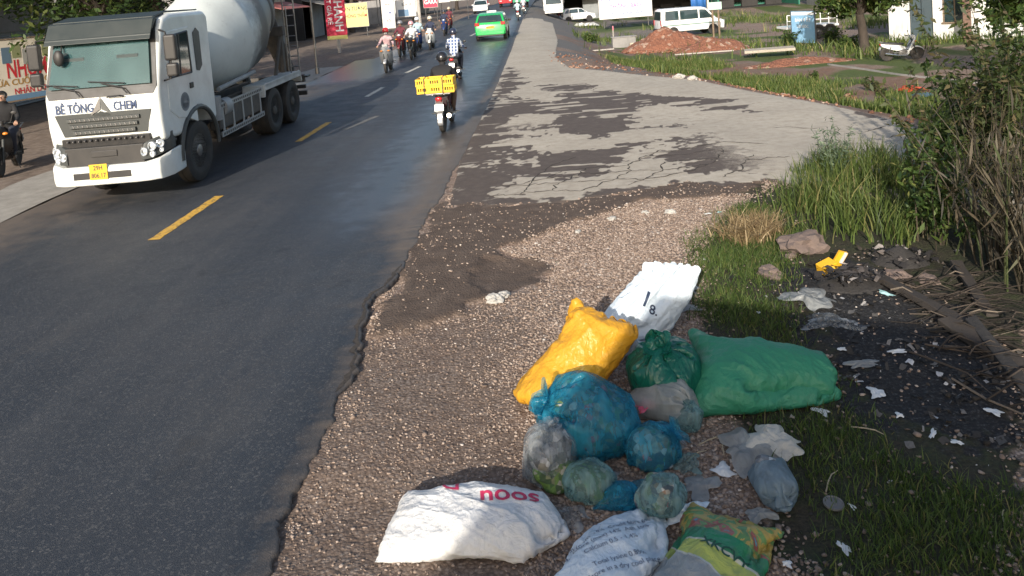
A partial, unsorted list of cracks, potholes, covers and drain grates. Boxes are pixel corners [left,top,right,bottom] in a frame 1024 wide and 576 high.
crack [495,126,816,196]
